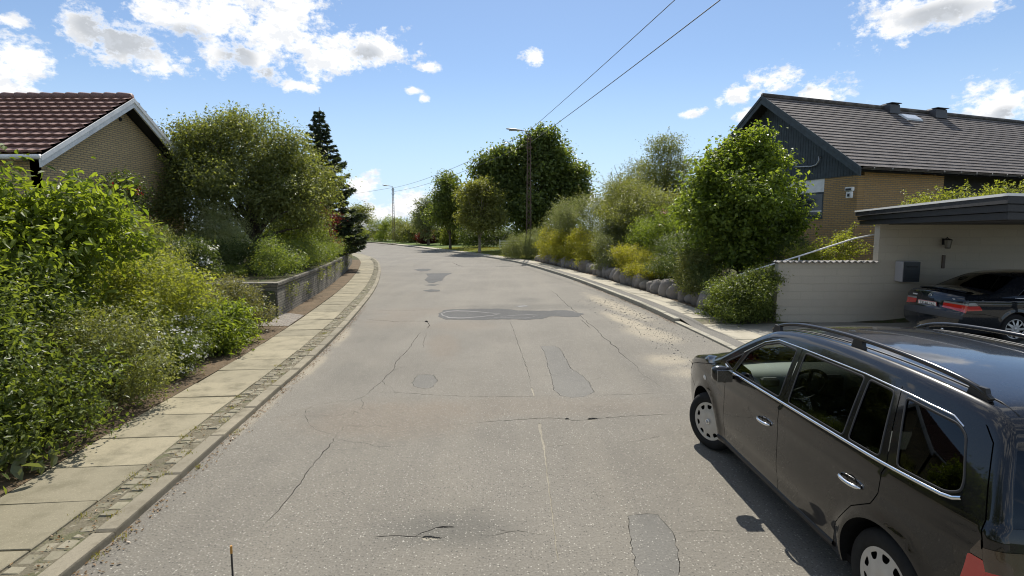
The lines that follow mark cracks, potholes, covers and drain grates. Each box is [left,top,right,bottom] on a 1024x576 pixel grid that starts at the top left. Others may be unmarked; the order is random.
crack [379,526,448,538]
crack [263,310,535,526]
